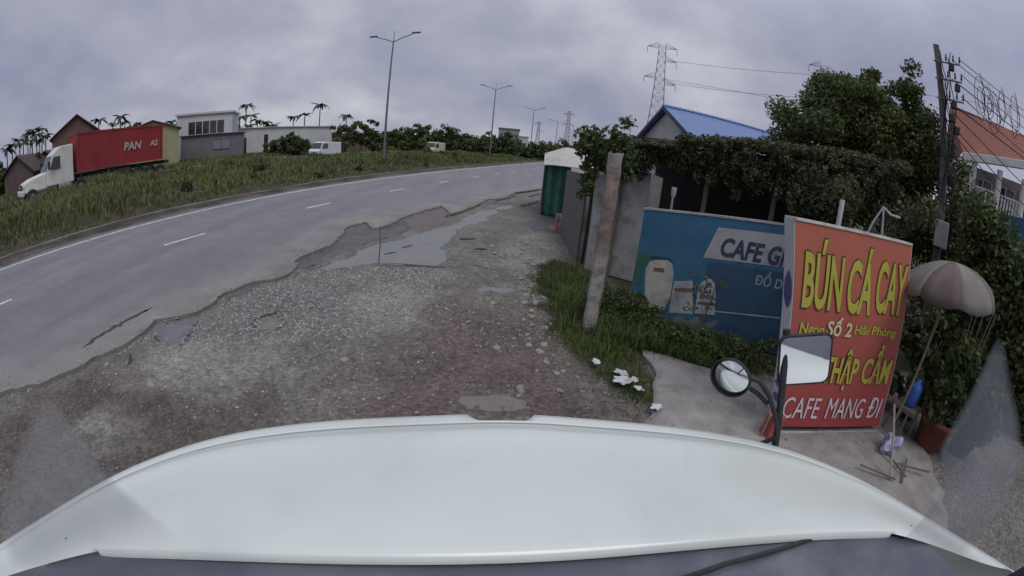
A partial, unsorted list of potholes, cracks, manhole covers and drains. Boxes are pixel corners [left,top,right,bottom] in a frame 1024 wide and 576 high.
pothole [406,208,451,228]
crack [82,307,152,366]
pothole [297,220,412,270]
pothole [252,313,284,331]
pothole [153,317,201,344]
